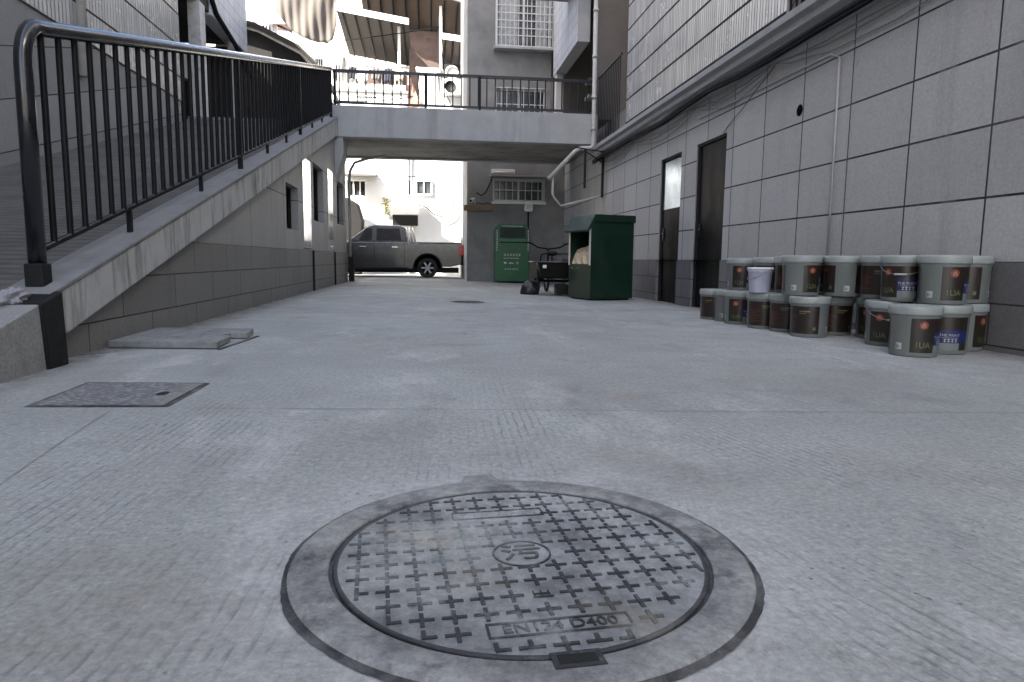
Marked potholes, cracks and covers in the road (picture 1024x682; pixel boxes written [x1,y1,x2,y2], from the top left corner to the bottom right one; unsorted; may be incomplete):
manhole cover [24,382,210,407]
manhole cover [280,475,765,682]
